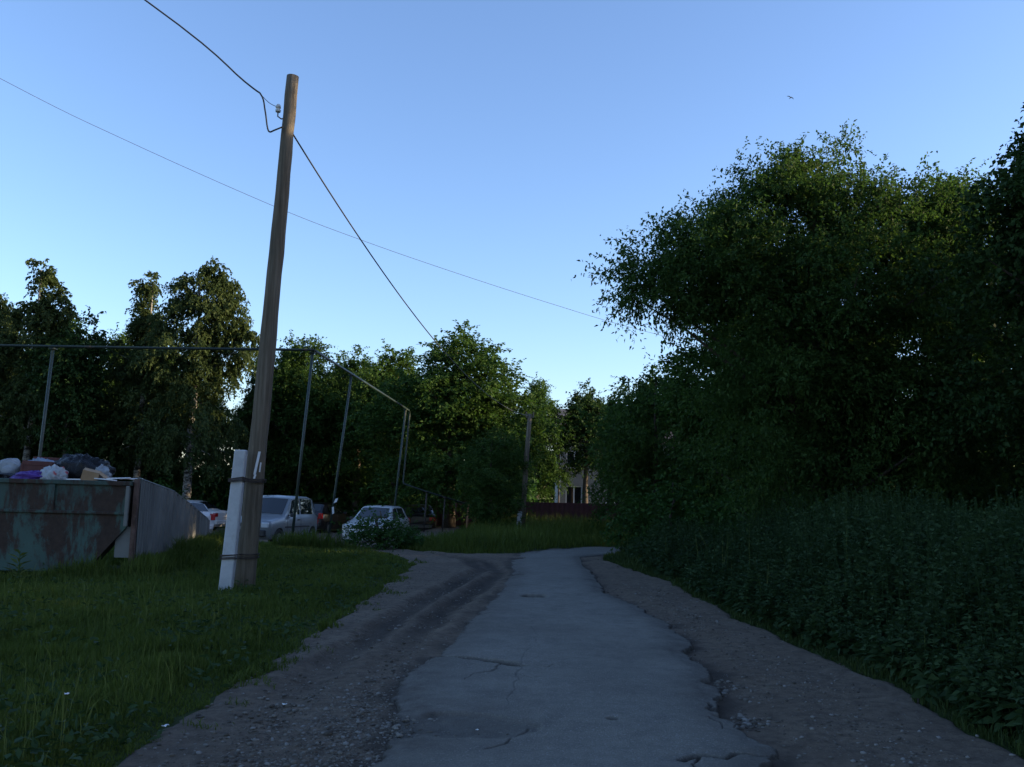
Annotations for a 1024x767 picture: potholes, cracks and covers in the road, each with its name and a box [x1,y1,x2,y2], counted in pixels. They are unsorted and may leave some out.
crack [441,597,558,709]
crack [671,749,779,767]
crack [479,739,515,750]
